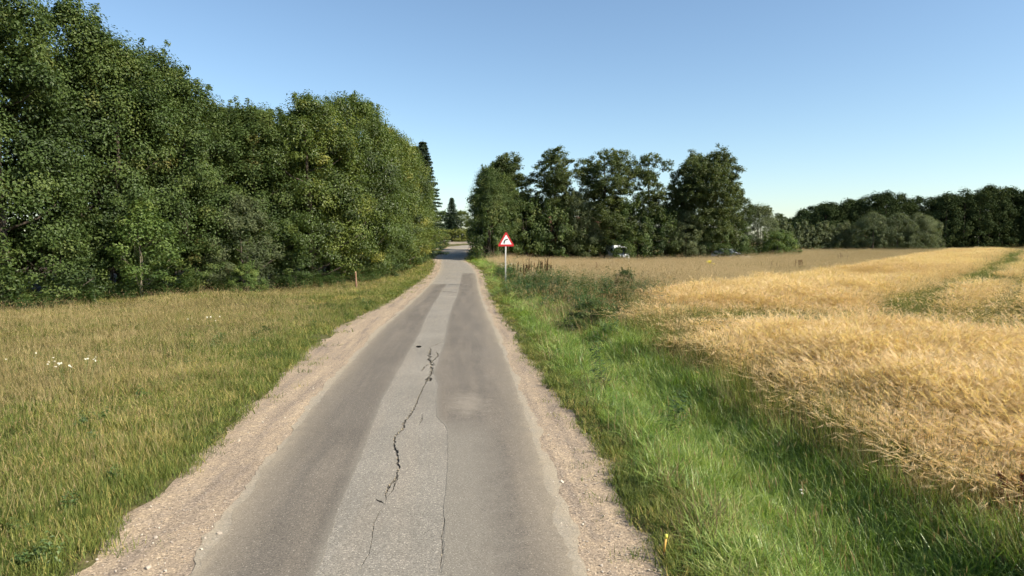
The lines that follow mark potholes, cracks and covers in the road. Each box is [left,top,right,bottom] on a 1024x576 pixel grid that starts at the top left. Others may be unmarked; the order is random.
crack [360,343,445,576]
